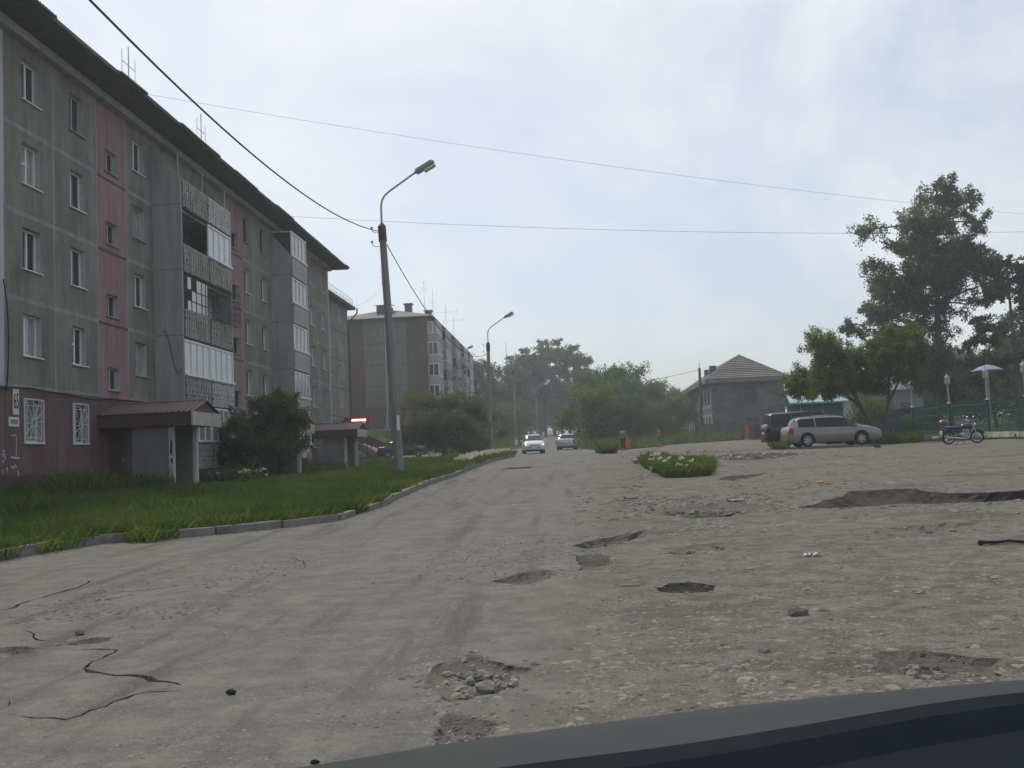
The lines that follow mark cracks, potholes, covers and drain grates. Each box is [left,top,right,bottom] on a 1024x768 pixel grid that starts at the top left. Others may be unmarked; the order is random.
crack [0,648,182,720]
pothole [571,530,651,549]
pothole [431,714,500,746]
pothole [576,554,612,570]
crack [5,580,179,610]
pothole [798,489,1024,508]
pothole [493,570,554,585]
pothole [872,649,1013,682]
pothole [0,647,37,655]
pothole [657,582,715,594]
pothole [638,504,774,518]
pothole [424,653,534,703]
